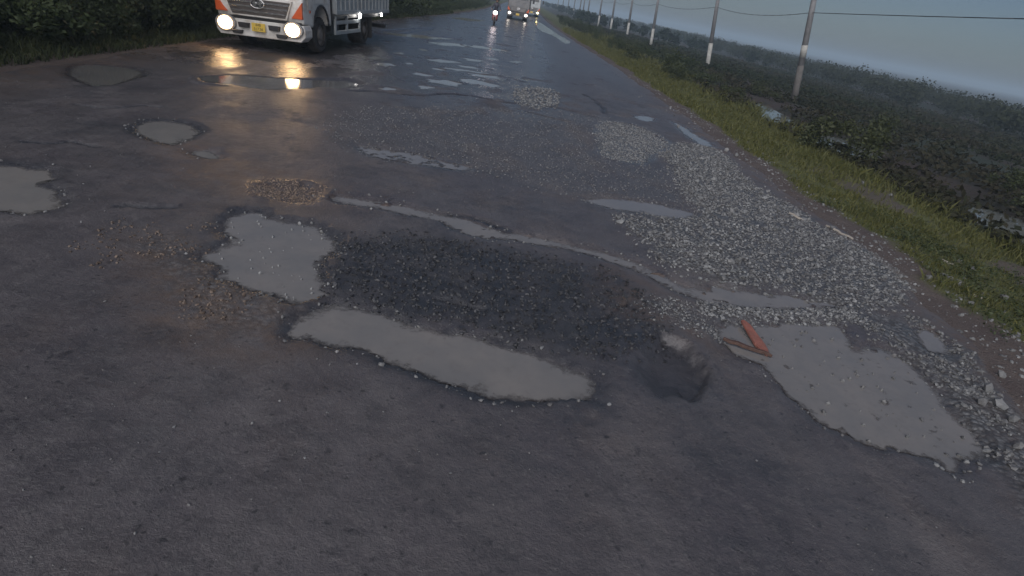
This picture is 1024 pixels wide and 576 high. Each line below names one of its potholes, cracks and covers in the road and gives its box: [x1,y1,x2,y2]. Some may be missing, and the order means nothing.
pothole [121,118,210,146]
pothole [707,314,1004,480]
pothole [272,296,611,408]
pothole [0,161,78,215]
pothole [347,143,479,173]
pothole [325,190,849,312]
pothole [238,178,333,206]
pothole [511,88,560,107]
crack [345,89,610,123]
pothole [189,206,349,307]
pothole [59,64,151,86]
pothole [192,74,364,90]
